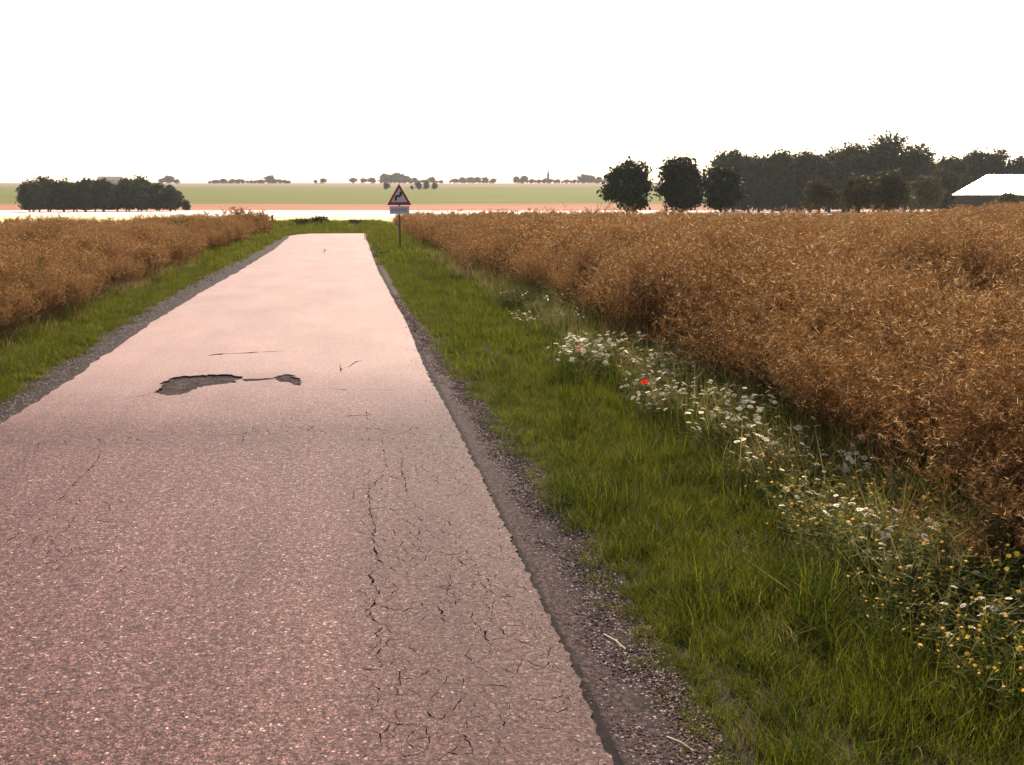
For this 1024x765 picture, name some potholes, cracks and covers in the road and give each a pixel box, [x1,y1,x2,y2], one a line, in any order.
pothole [273,374,301,386]
crack [3,434,143,570]
pothole [155,374,243,395]
crack [334,412,579,761]
